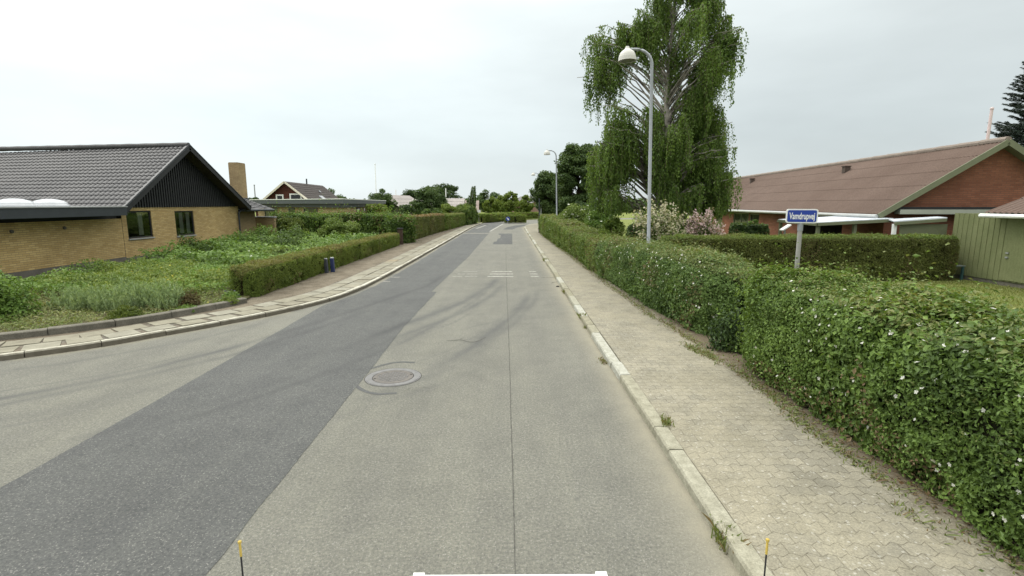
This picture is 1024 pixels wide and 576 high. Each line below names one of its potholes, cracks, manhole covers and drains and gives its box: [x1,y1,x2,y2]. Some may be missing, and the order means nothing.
manhole cover [364,368,422,387]
